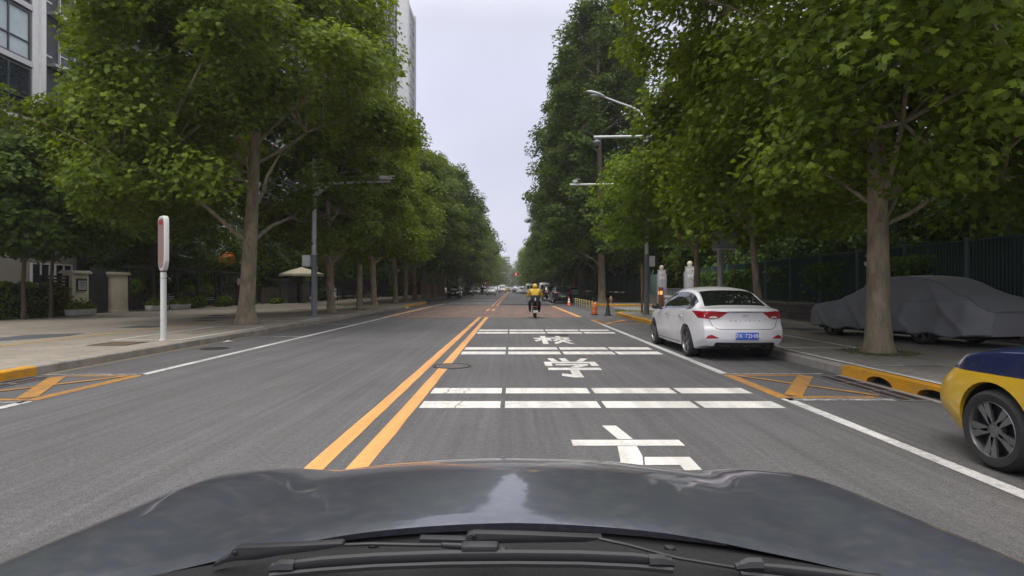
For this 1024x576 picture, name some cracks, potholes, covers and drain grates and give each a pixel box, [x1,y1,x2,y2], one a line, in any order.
drain grate [815,376,933,401]
